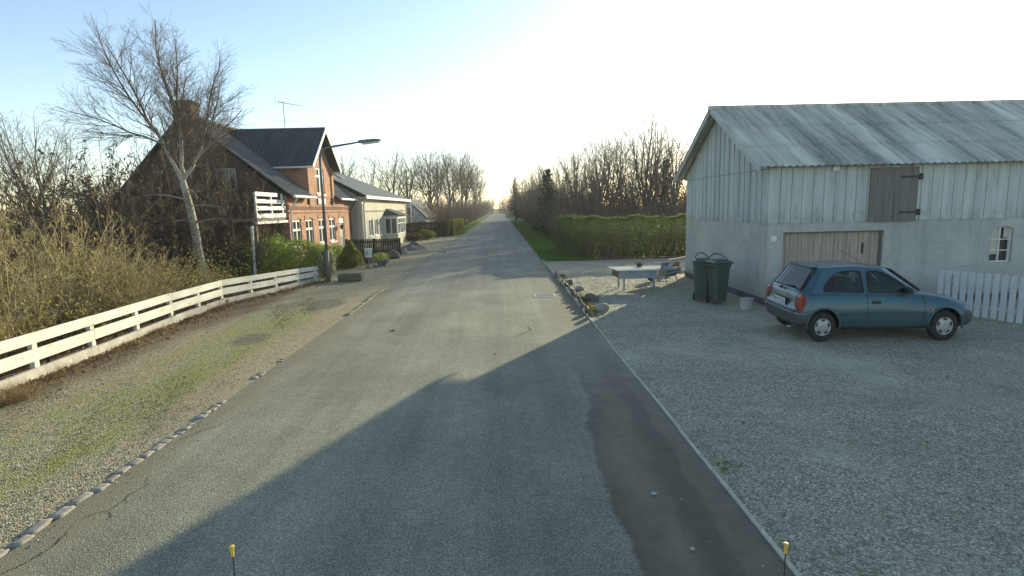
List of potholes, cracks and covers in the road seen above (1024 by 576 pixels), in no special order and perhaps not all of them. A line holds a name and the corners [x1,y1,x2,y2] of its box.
crack [0,525,73,575]
